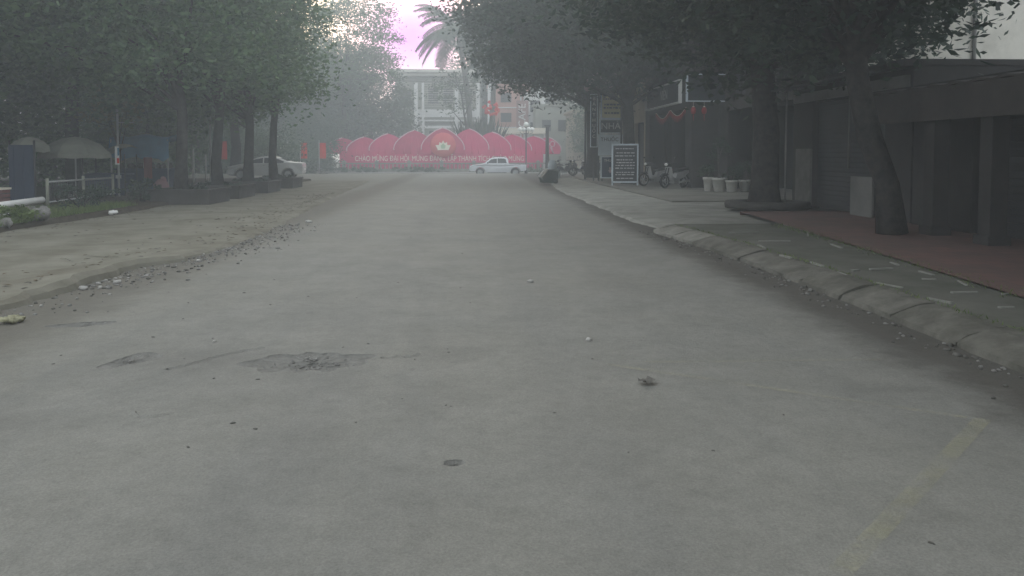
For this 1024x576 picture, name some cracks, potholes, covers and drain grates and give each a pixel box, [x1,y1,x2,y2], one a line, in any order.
pothole [36,320,124,330]
pothole [88,351,170,372]
pothole [225,350,387,376]
pothole [433,456,474,471]
crack [165,346,265,370]
